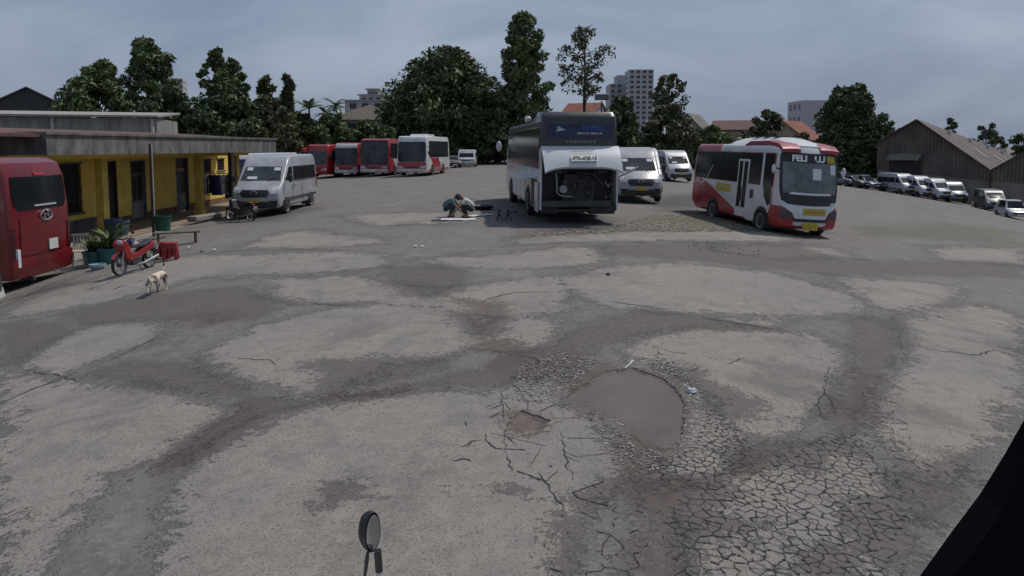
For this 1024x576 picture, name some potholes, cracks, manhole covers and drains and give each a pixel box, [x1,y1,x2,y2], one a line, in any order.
crack [24,332,162,377]
crack [648,406,751,485]
crack [662,428,920,576]
crack [458,319,648,576]
pothole [499,409,559,438]
pothole [547,362,709,460]
crack [728,357,836,416]
